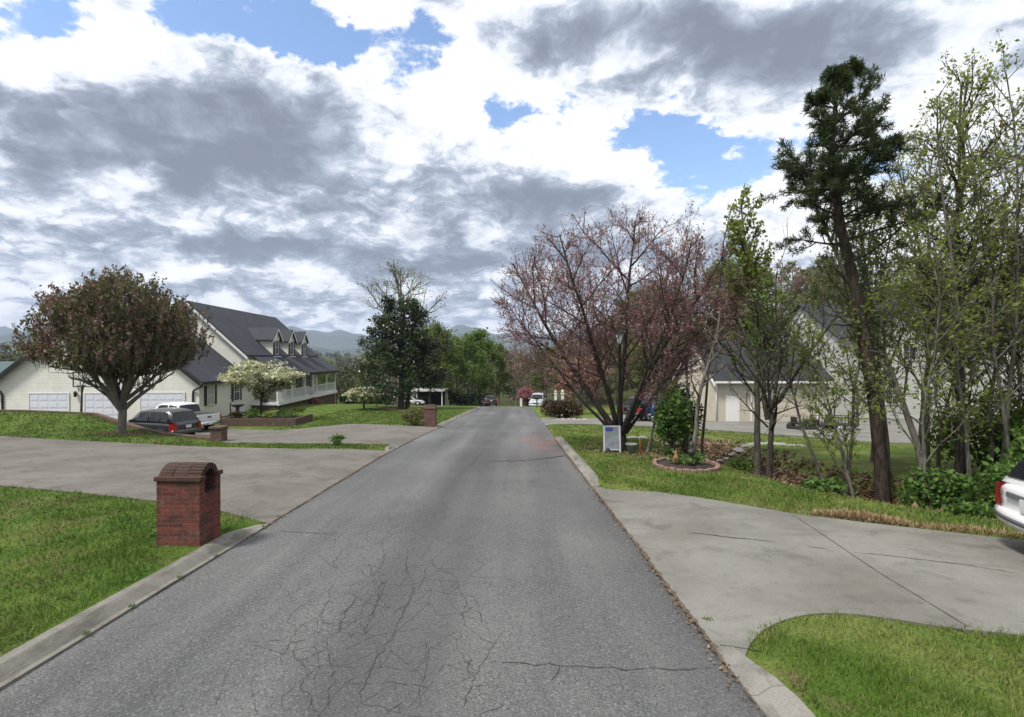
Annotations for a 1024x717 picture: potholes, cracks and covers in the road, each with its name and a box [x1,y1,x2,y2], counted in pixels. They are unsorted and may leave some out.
crack [171,470,699,717]
